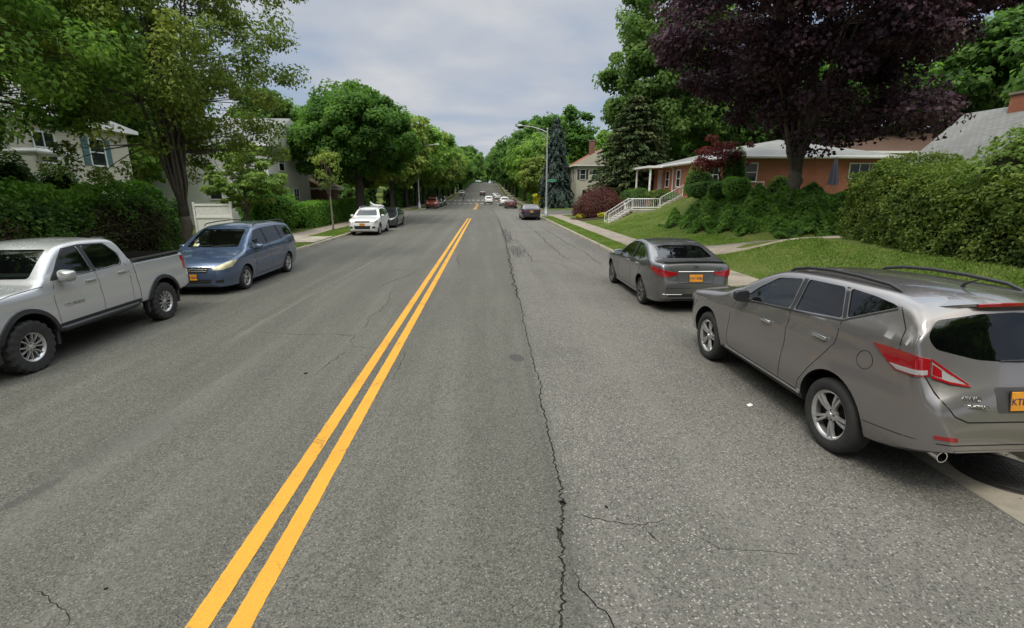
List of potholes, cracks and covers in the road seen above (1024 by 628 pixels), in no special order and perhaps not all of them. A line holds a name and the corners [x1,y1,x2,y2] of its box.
crack [22,587,76,628]
crack [266,269,417,378]
crack [498,219,817,628]
